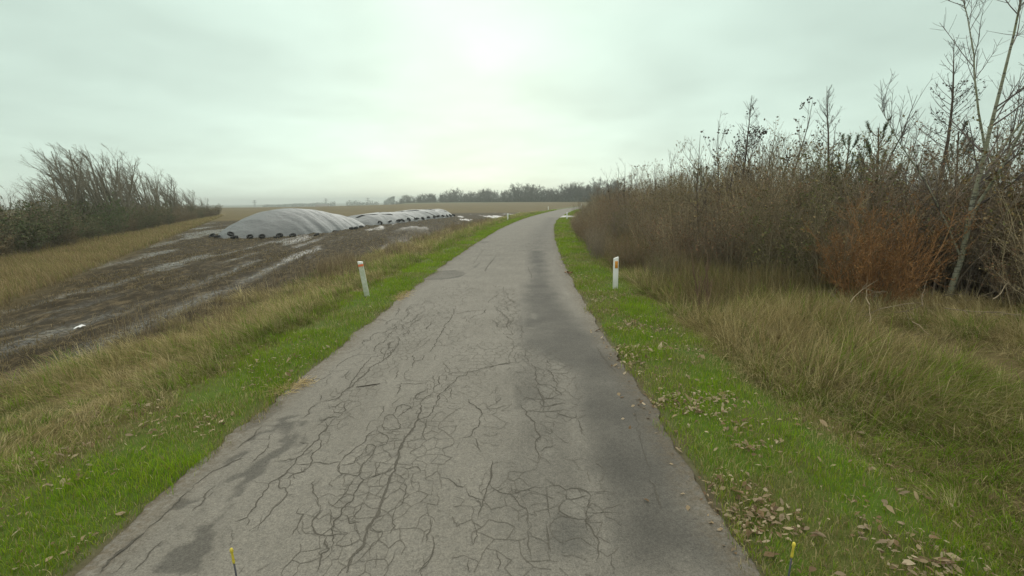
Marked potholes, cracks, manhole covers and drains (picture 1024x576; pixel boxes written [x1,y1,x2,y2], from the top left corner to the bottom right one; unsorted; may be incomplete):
crack [100,250,623,576]
